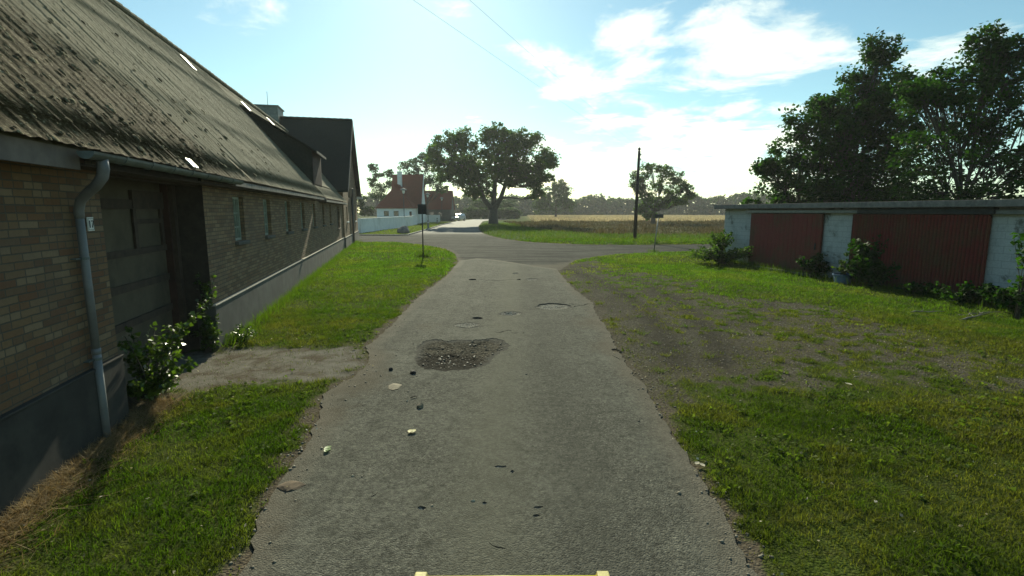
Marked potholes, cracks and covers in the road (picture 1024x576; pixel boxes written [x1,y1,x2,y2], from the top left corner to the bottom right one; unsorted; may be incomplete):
pothole [414,338,511,372]
